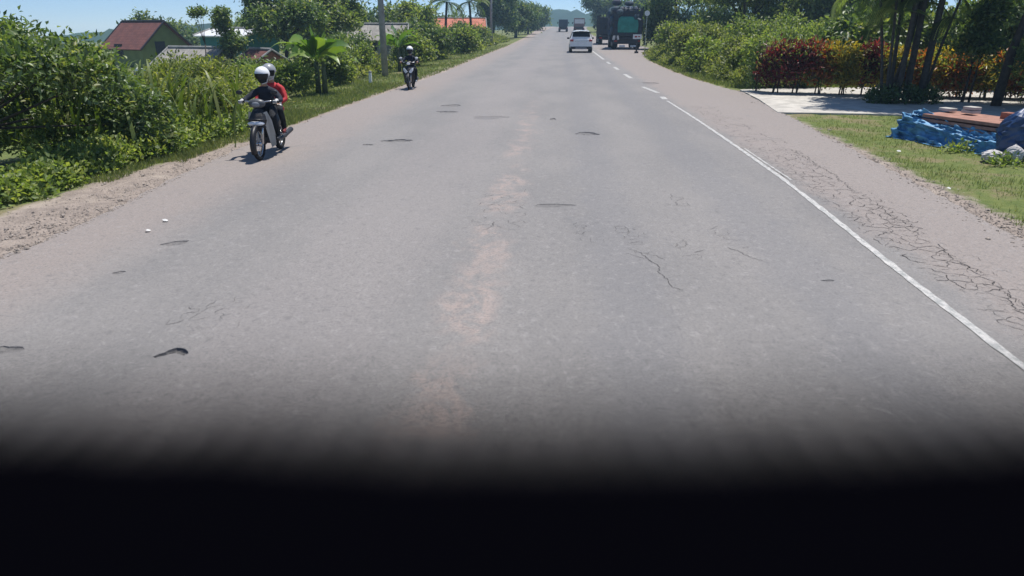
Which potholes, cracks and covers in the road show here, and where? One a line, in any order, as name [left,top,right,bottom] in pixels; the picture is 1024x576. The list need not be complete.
crack [582,226,681,290]
pothole [0,346,24,354]
pothole [153,348,189,358]
crack [692,107,1024,336]
